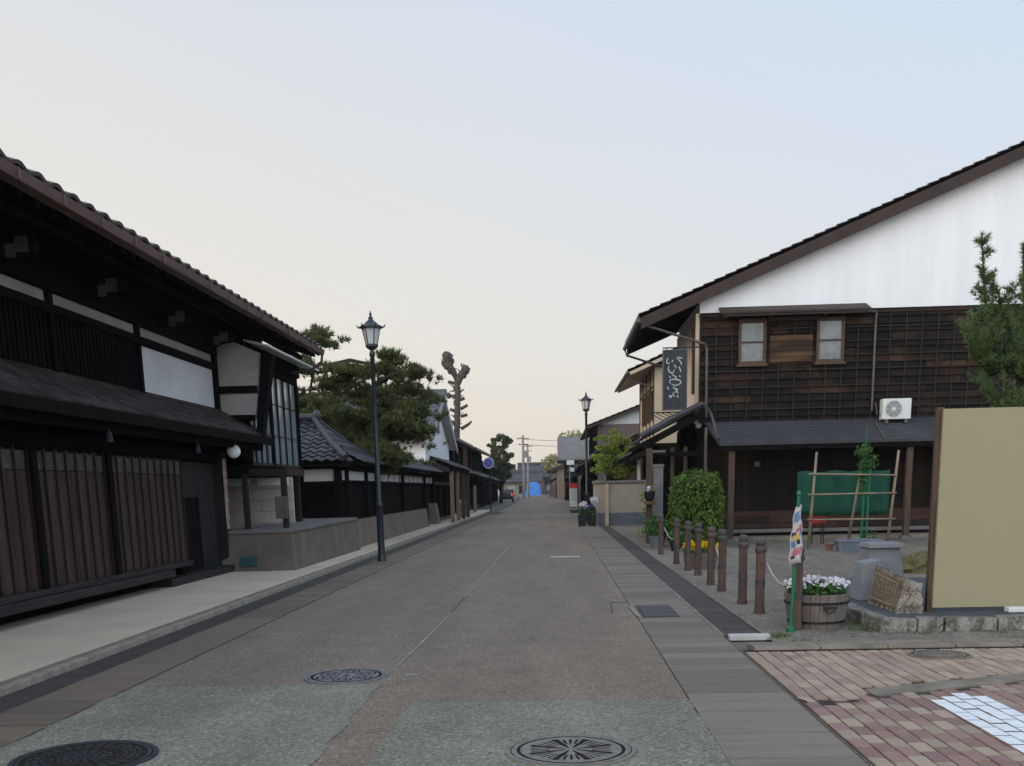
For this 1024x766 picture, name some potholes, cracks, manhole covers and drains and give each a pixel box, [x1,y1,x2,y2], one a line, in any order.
manhole cover [505,734,637,766]
manhole cover [7,740,159,766]
manhole cover [908,649,972,661]
manhole cover [304,668,388,685]
